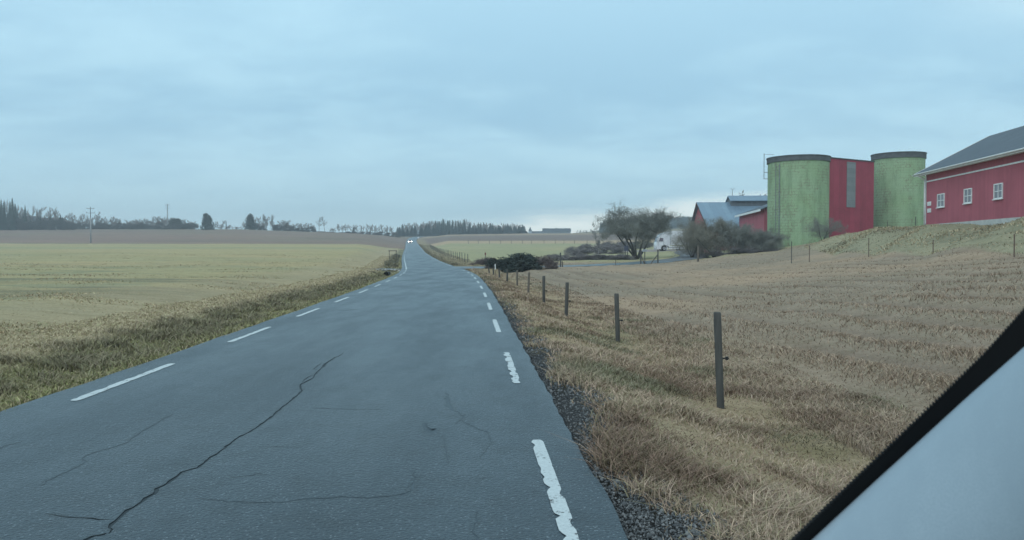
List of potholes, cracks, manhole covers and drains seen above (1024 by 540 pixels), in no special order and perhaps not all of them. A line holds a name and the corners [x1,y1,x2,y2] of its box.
crack [442,393,492,464]
crack [210,471,417,503]
crack [50,353,343,540]
